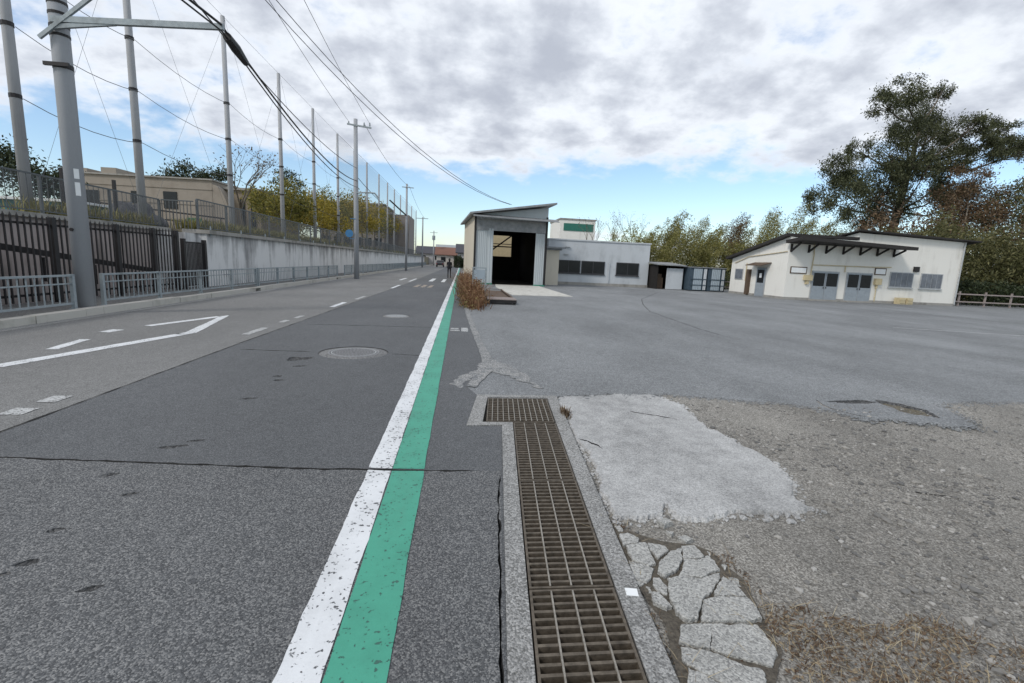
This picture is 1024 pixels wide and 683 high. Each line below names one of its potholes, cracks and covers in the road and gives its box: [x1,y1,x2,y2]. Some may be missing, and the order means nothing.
pothole [875,400,940,418]
drain grate [529,587,648,683]
drain grate [513,422,576,485]
drain grate [519,480,614,596]
drain grate [486,398,554,423]
crack [612,525,782,683]
manhole cover [319,347,388,359]
